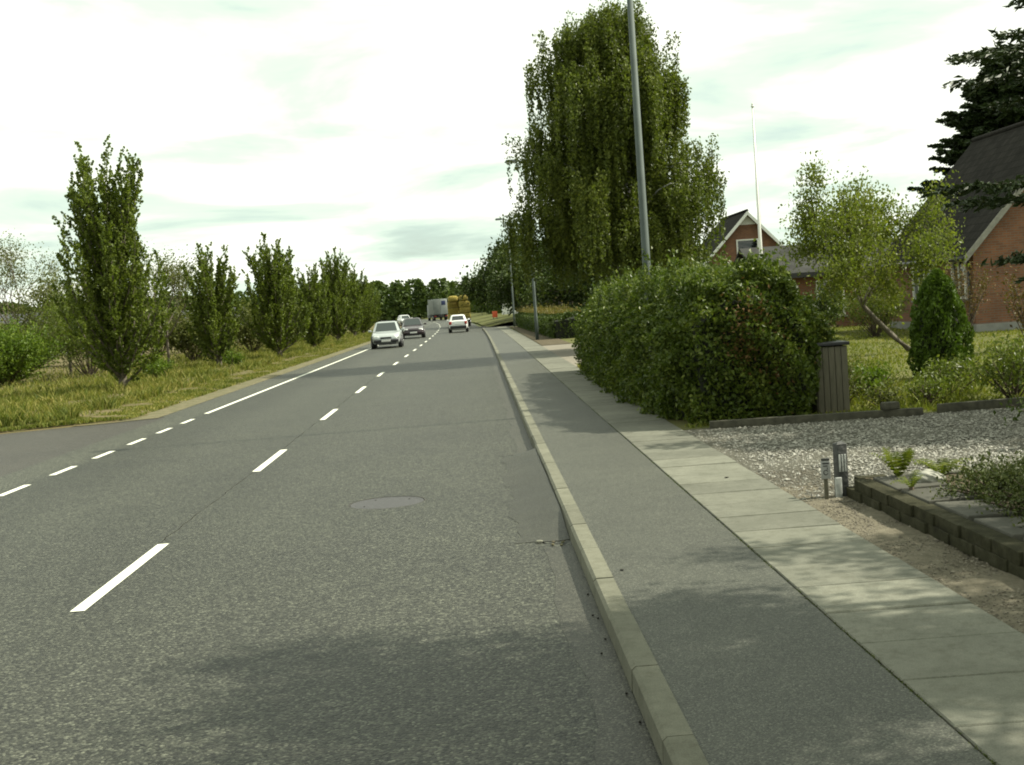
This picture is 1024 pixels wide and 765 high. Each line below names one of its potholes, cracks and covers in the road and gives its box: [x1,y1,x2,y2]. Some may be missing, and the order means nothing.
manhole cover [347,496,427,510]
